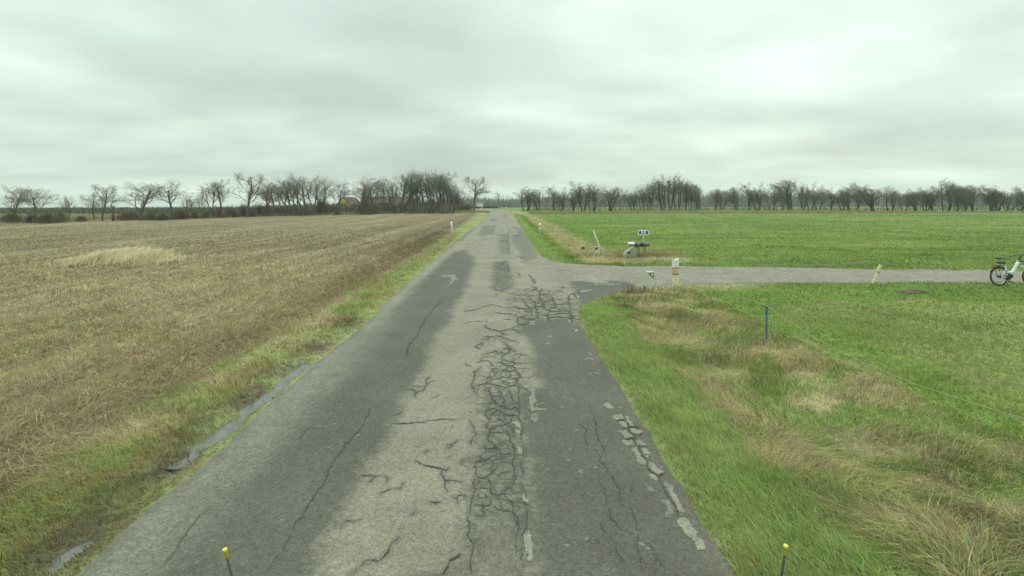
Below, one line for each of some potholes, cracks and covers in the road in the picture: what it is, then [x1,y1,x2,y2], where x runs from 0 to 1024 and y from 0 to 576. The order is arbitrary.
crack [267,408,371,572]
crack [387,234,577,575]
crack [578,415,679,573]
